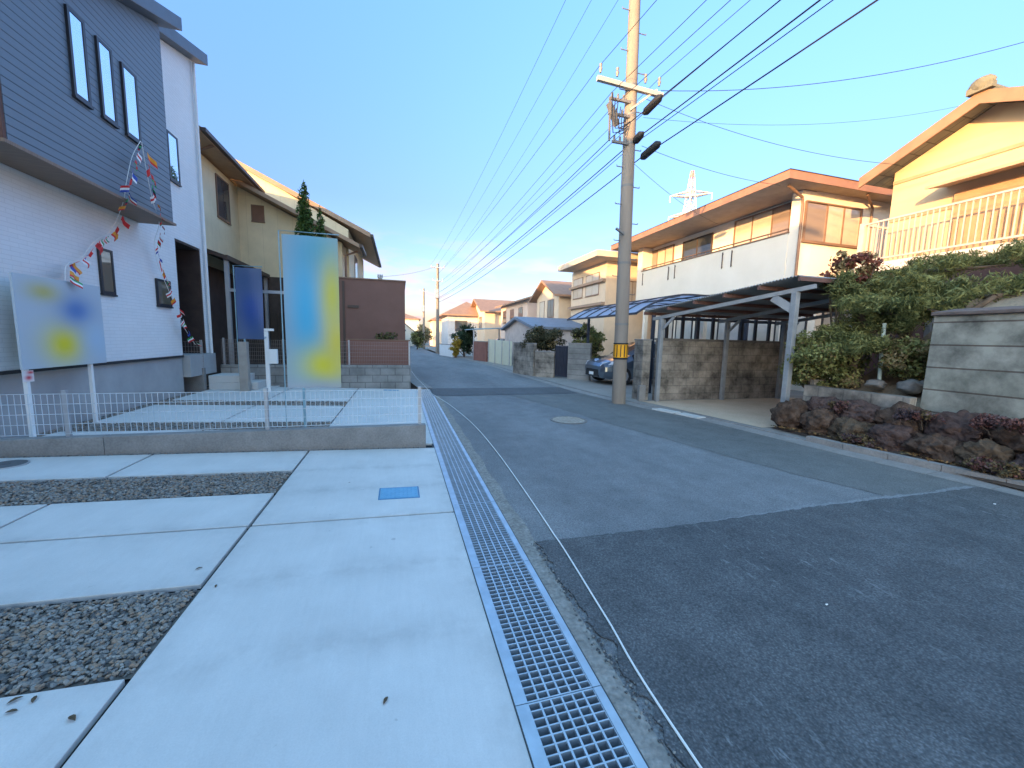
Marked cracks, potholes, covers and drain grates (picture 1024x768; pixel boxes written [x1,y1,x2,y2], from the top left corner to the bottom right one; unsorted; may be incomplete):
drain grate [434,444,475,470]
drain grate [516,686,648,768]
drain grate [442,467,495,505]
drain grate [453,501,528,570]
drain grate [429,428,462,446]
drain grate [421,400,441,408]
drain grate [425,416,453,429]
drain grate [422,407,446,417]
manhole cover [550,416,587,424]
drain grate [473,560,600,708]
